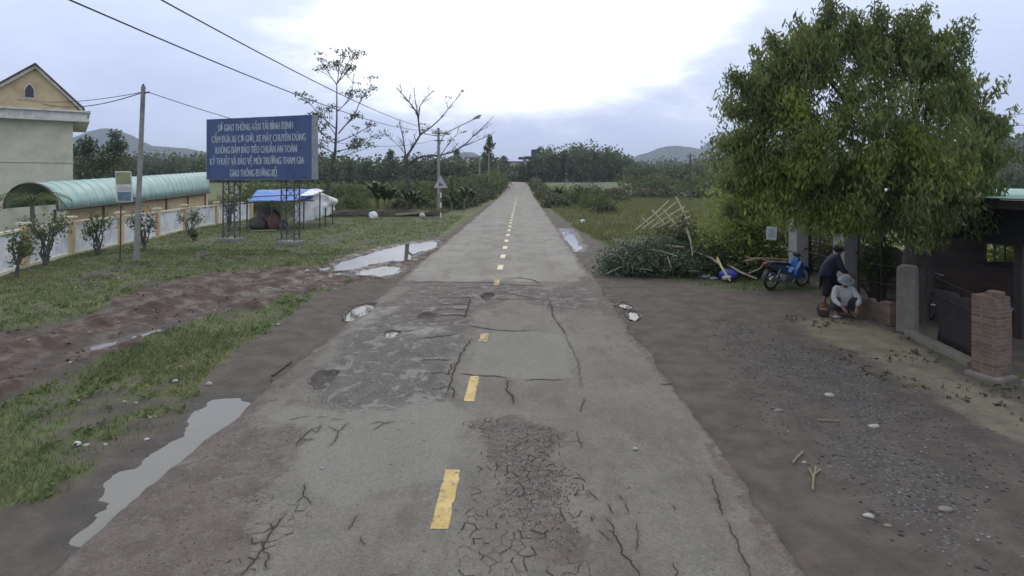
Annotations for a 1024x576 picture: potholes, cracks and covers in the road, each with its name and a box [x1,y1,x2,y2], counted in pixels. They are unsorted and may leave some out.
crack [216,484,312,576]
crack [290,416,347,447]
pothole [380,329,404,338]
pothole [343,301,379,322]
pothole [303,368,344,392]
crack [708,474,751,576]
pothole [413,311,440,320]
crack [422,278,640,576]
pothole [625,309,643,322]
pothole [477,291,497,300]
pothole [615,301,636,310]
